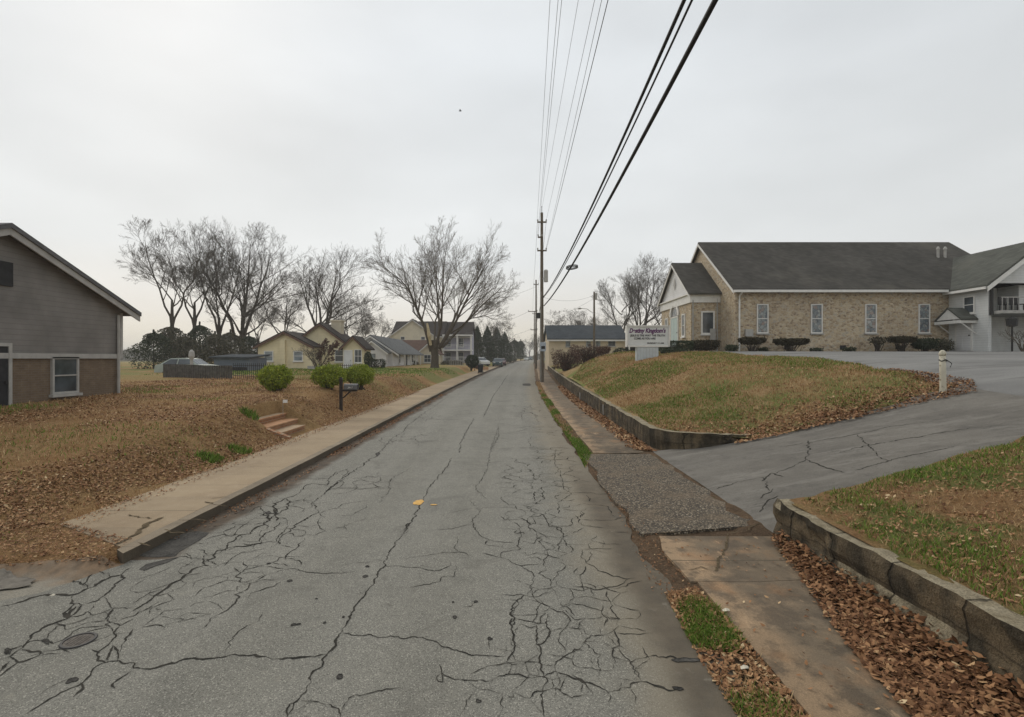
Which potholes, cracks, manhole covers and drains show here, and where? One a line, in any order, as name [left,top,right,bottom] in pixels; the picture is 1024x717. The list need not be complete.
crack [717,422,998,512]
manhole cover [58,632,98,649]
crack [688,533,729,571]
crack [0,394,682,717]
